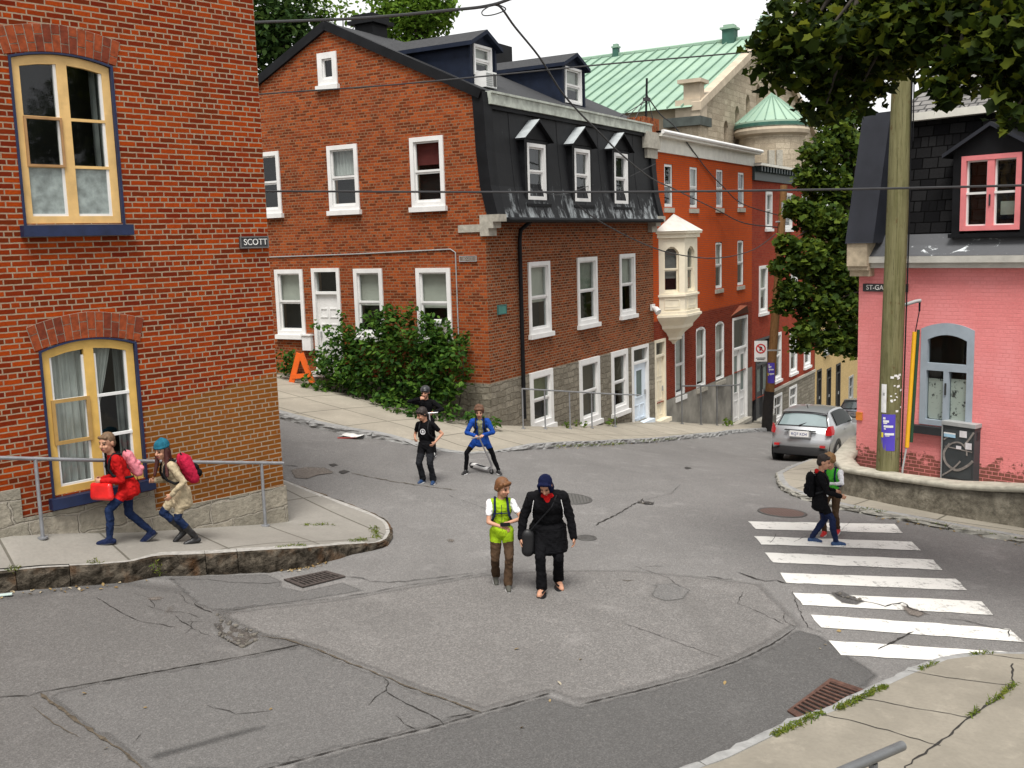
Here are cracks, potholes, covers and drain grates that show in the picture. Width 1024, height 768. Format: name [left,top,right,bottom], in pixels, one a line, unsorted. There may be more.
manhole cover [757,507,807,518]
drain grate [787,678,863,717]
pothole [831,591,863,604]
manhole cover [568,493,592,504]
crack [835,593,925,613]
drain grate [284,570,346,588]
crack [370,679,477,730]
crack [98,593,211,635]
pothole [214,613,260,648]
